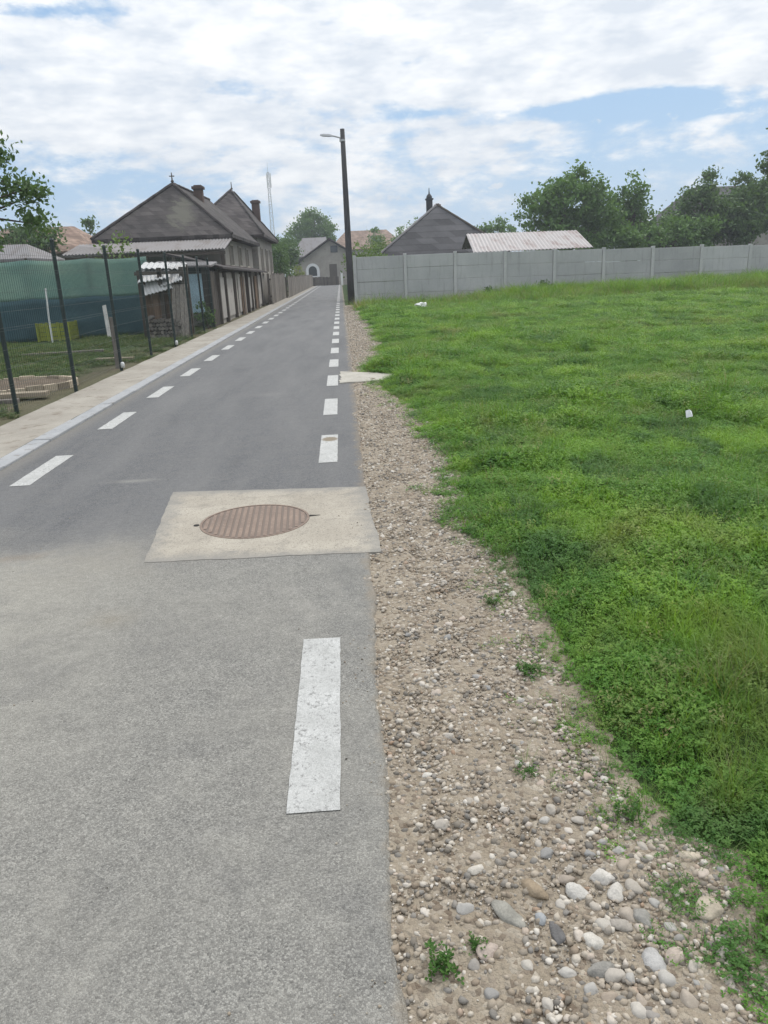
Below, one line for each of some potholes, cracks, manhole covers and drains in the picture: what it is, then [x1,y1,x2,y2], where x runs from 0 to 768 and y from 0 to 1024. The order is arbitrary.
manhole cover [194,504,317,539]
